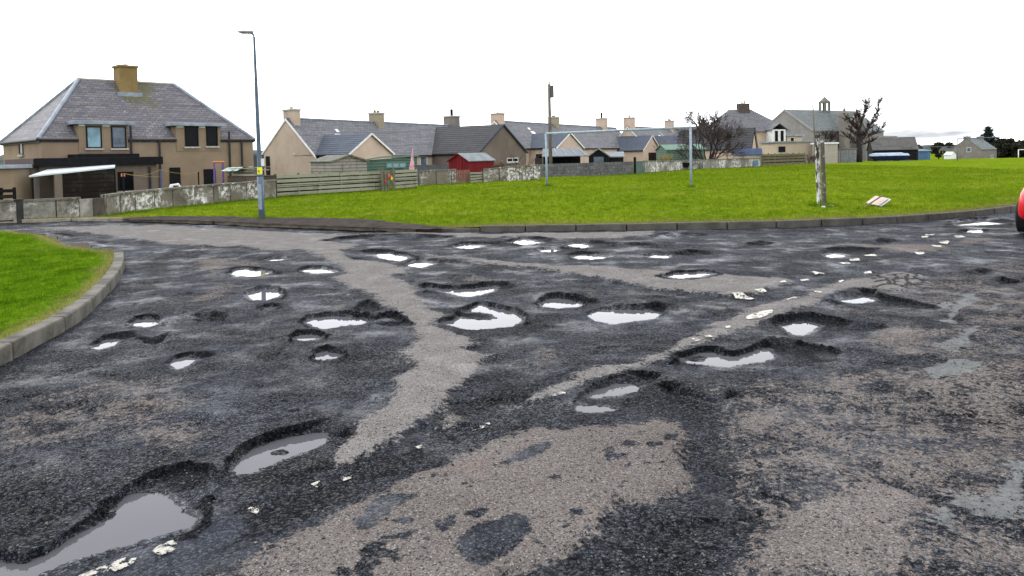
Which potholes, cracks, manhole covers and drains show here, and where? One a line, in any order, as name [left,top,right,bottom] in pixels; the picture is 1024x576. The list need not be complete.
pothole [242,286,286,303]
pothole [298,310,379,331]
pothole [290,330,331,344]
pothole [0,460,219,576]
pothole [570,294,598,305]
pothole [124,315,166,329]
pothole [769,312,886,340]
pothole [828,289,943,320]
pothole [219,418,350,496]
pothole [434,303,530,335]
pothole [161,352,216,374]
pothole [657,270,722,280]
